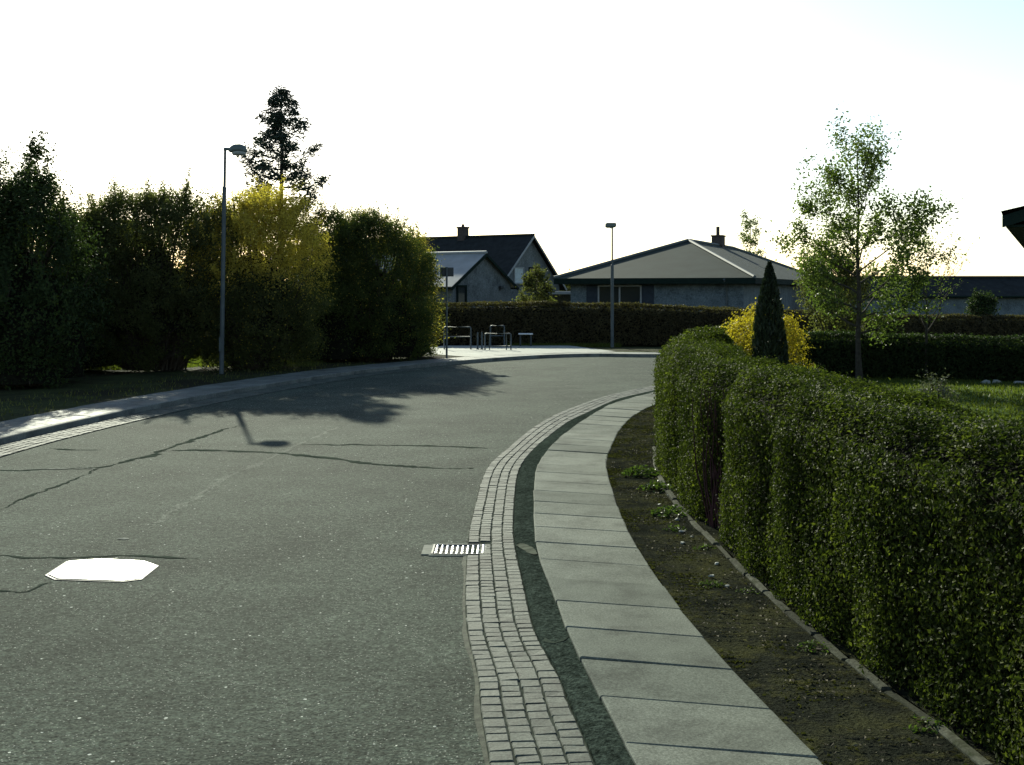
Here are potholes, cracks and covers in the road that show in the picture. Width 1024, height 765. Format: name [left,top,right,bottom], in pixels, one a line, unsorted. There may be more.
drain grate [421,544,486,556]
crack [1,426,481,508]
manhole cover [45,559,159,583]
